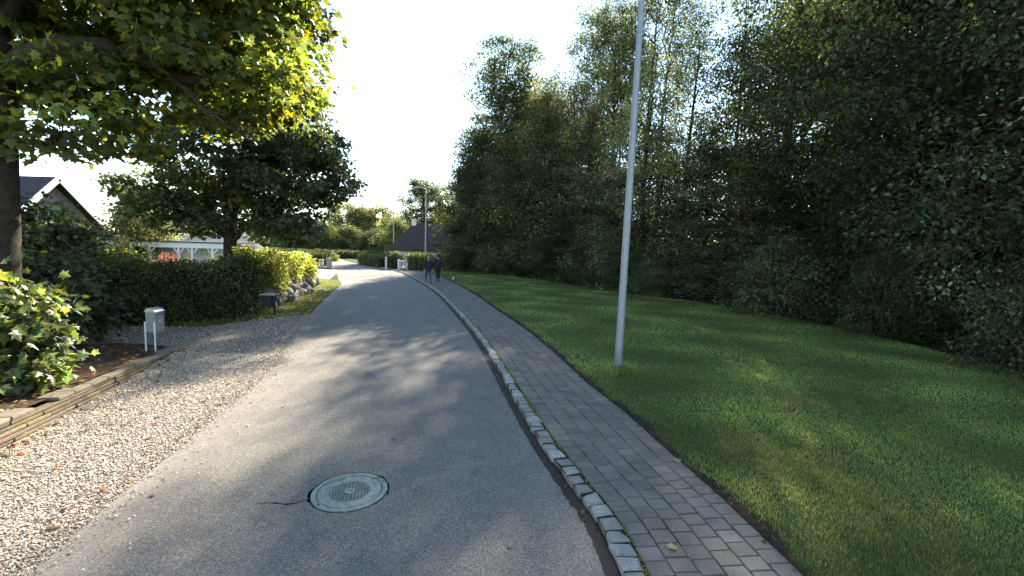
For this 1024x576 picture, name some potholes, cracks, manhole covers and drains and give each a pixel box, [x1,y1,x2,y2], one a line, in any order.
manhole cover [307,473,390,513]
